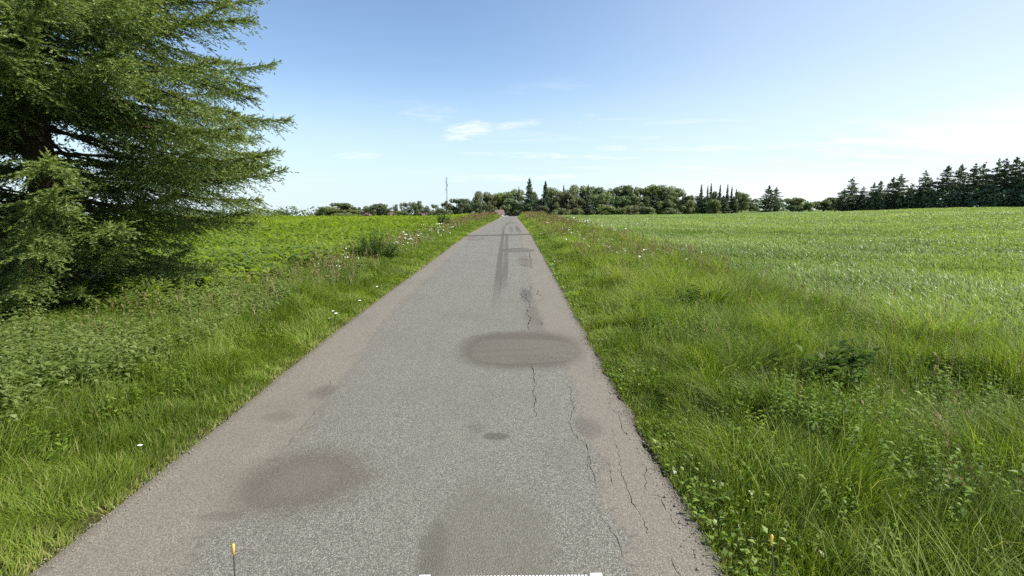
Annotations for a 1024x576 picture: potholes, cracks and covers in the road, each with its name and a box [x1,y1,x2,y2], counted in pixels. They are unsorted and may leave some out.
crack [568,366,676,542]
